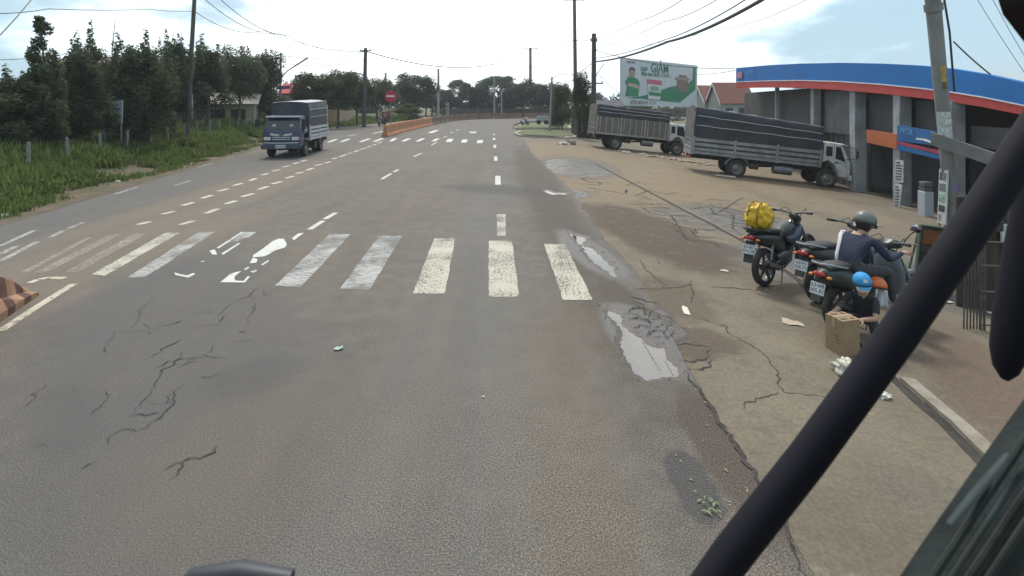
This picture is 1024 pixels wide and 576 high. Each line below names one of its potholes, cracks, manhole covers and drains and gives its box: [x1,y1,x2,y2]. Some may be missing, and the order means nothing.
pothole [565,230,621,279]
crack [163,444,220,475]
crack [625,258,826,408]
crack [107,289,277,444]
pothole [598,303,686,382]
